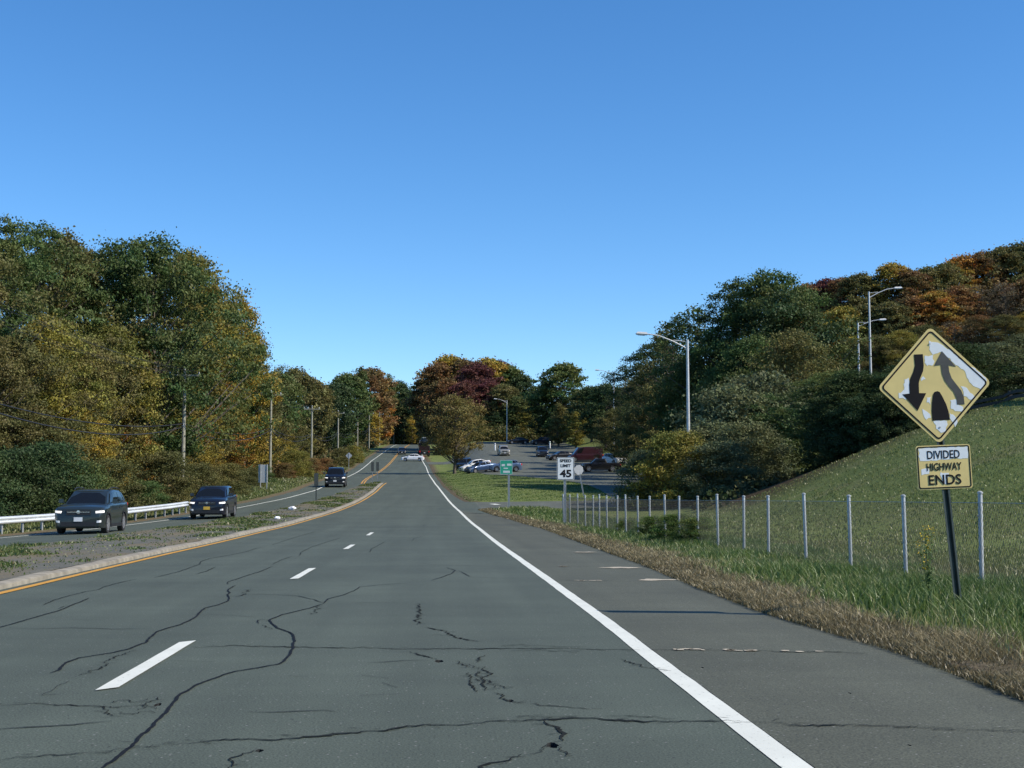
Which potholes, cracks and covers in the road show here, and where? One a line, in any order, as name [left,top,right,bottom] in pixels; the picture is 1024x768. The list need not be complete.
crack [2,603,851,768]
